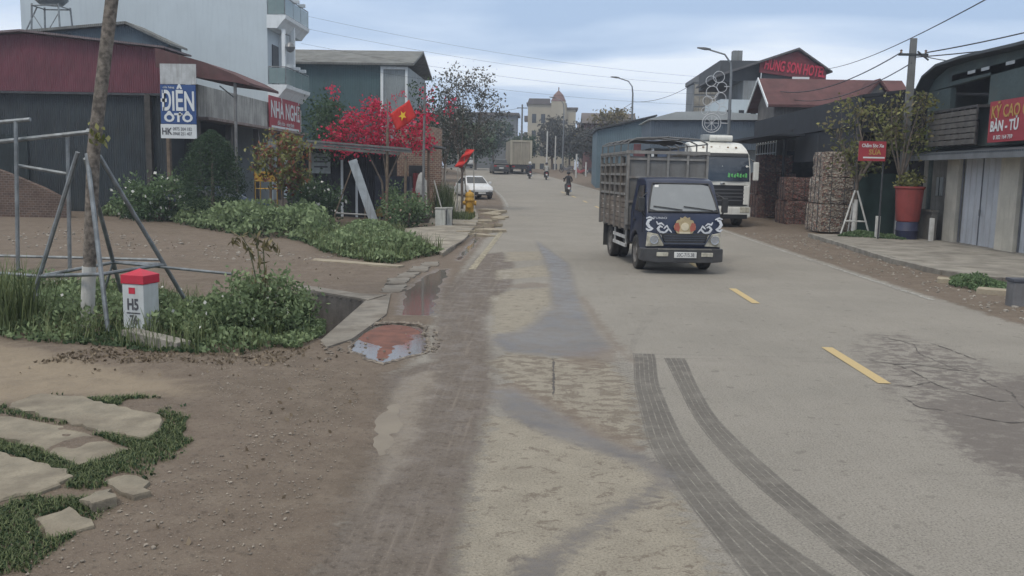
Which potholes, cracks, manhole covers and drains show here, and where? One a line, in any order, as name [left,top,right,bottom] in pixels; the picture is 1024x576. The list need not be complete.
pothole [347,321,431,365]
crack [872,335,1023,423]
